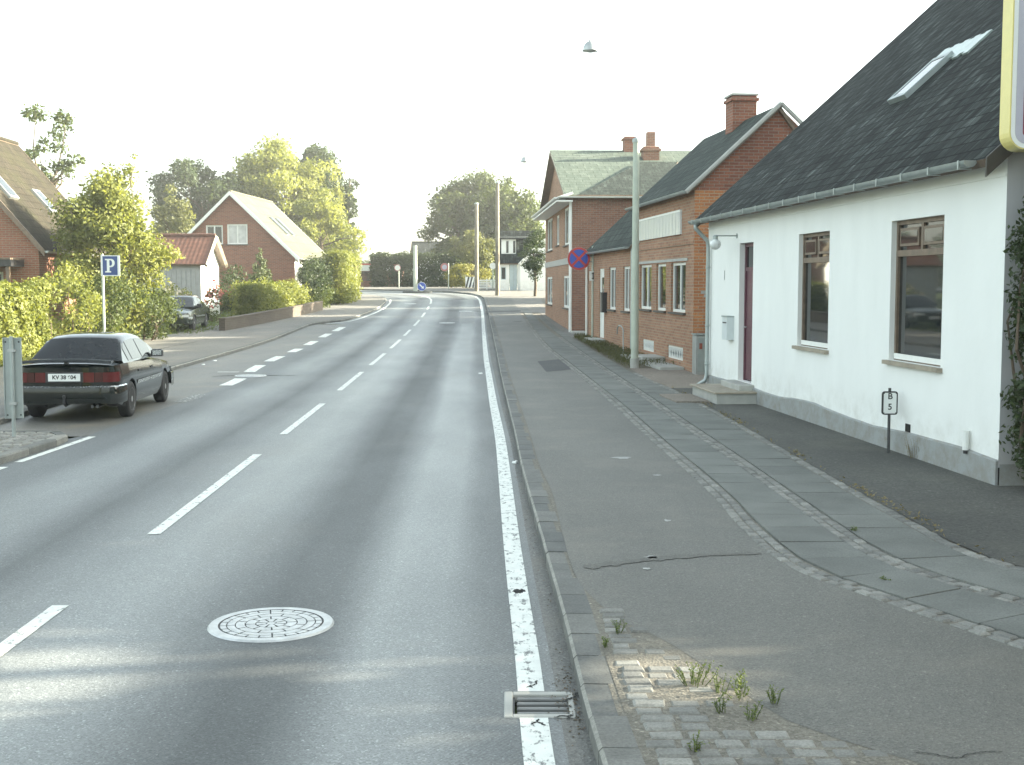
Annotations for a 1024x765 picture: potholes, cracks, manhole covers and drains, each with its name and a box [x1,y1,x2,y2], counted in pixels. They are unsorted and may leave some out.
crack [583,552,762,569]
manhole cover [207,607,334,643]
drain grate [504,692,576,718]
